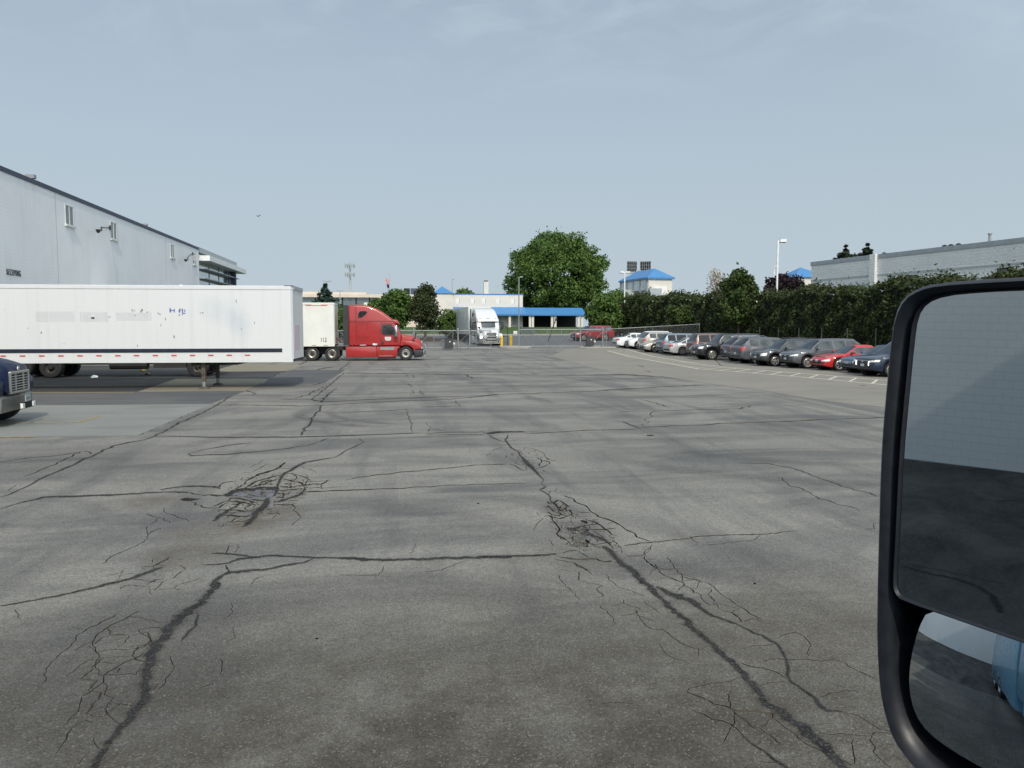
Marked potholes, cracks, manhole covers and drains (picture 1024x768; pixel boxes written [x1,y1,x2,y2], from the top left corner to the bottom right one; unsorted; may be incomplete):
crack [0,361,891,768]
pothole [222,486,280,498]
